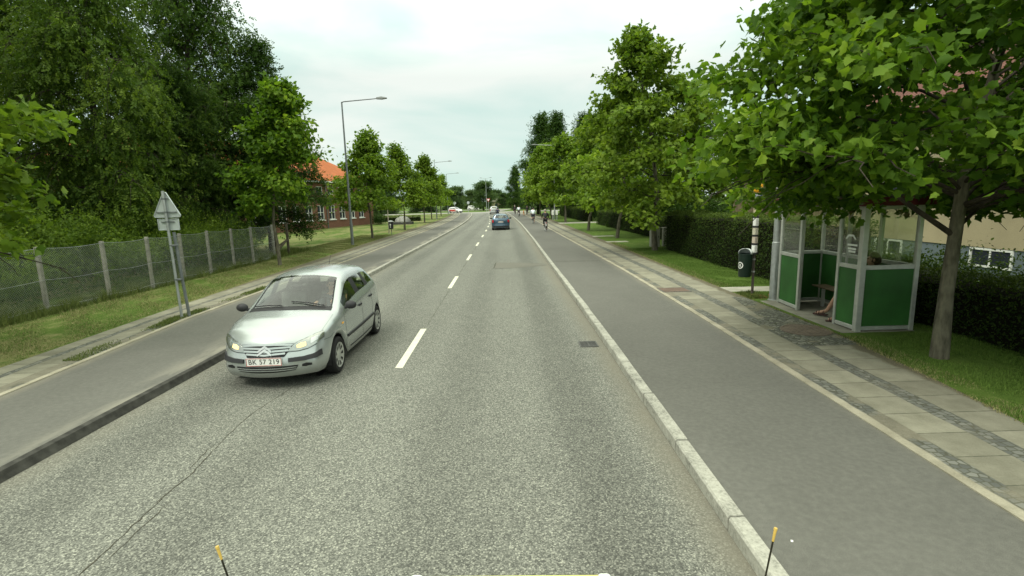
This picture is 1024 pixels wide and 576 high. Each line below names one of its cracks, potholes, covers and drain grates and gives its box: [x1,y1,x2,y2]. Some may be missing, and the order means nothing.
crack [78,383,299,576]
manhole cover [780,324,833,336]
